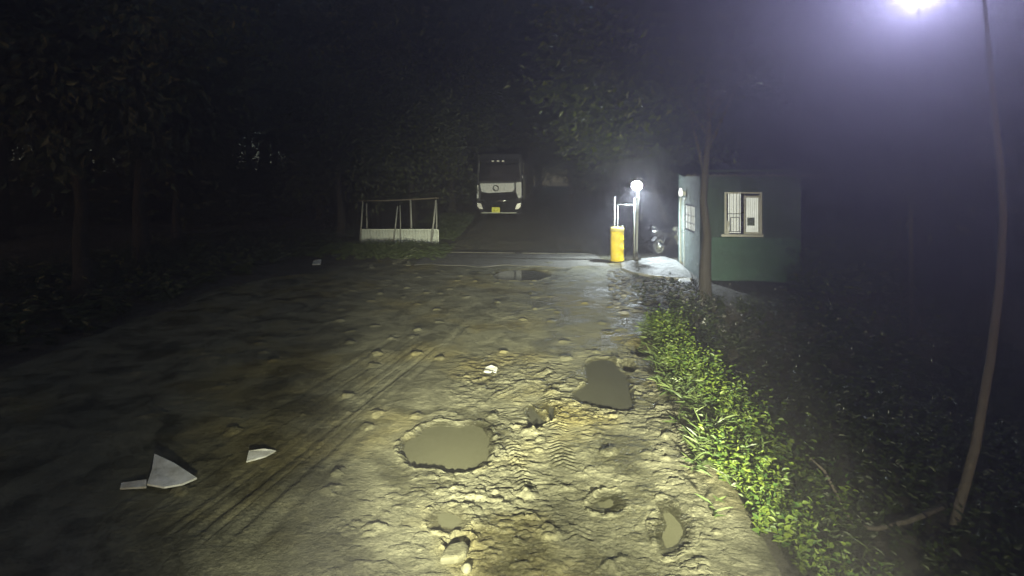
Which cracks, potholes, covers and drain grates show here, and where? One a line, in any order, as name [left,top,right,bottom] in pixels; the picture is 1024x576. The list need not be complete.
pothole [543,401,559,423]
pothole [489,268,553,281]
pothole [523,403,549,429]
pothole [583,487,631,518]
pothole [616,357,640,373]
pothole [570,355,636,412]
pothole [646,493,704,563]
pothole [421,501,476,540]
pothole [394,418,499,475]
